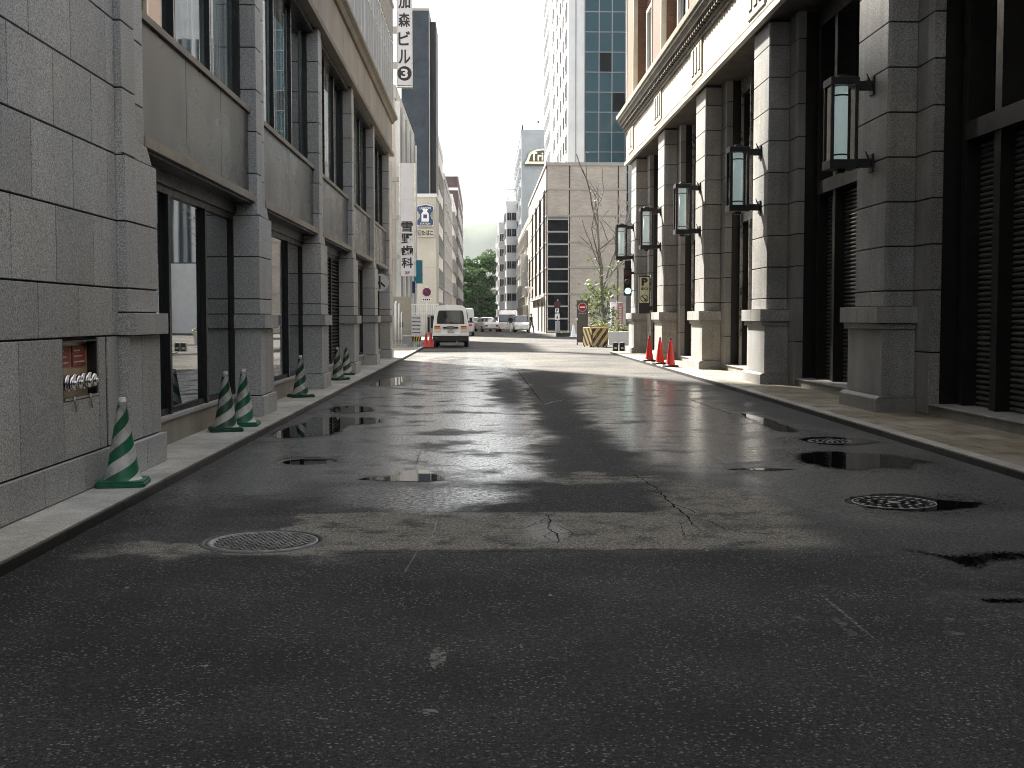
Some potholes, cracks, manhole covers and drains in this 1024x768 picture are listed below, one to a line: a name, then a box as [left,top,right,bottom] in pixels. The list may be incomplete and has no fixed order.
manhole cover [841,495,937,511]
crack [624,469,777,540]
manhole cover [198,530,326,554]
